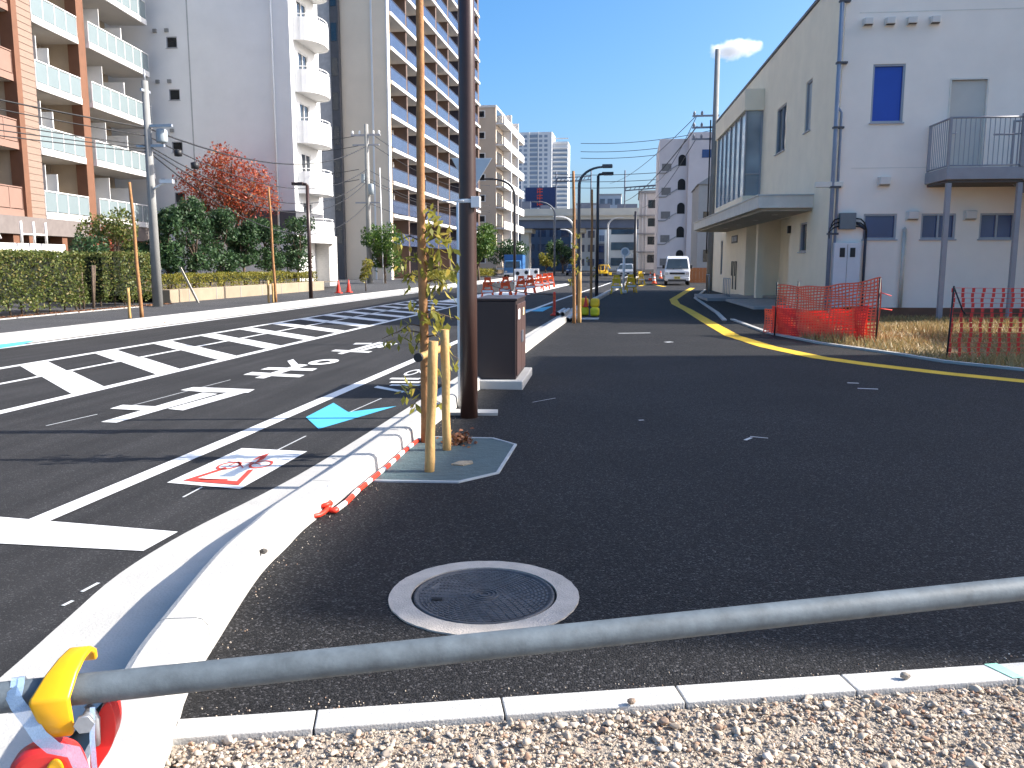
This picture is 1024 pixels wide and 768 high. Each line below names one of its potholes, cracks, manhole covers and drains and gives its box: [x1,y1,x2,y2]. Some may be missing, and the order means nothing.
manhole cover [388,561,579,635]
